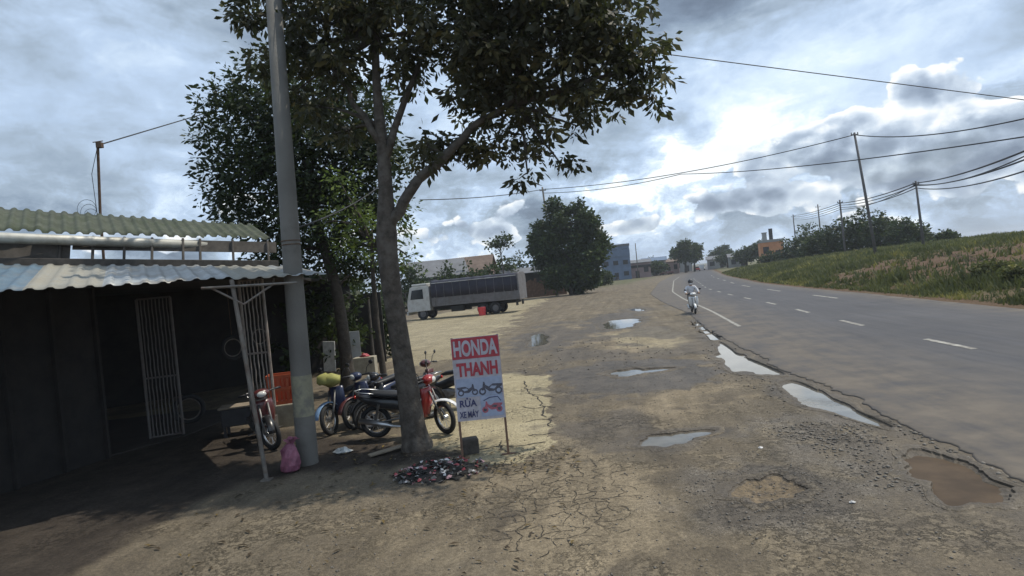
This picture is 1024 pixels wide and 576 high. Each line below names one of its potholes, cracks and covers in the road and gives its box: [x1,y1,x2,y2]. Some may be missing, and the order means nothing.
pothole [596,366,686,379]
pothole [774,379,902,432]
pothole [711,469,824,511]
crack [455,374,649,558]
pothole [523,331,557,348]
pothole [888,444,1024,512]
pothole [593,317,651,330]
pothole [707,341,789,377]
pothole [625,426,725,452]
